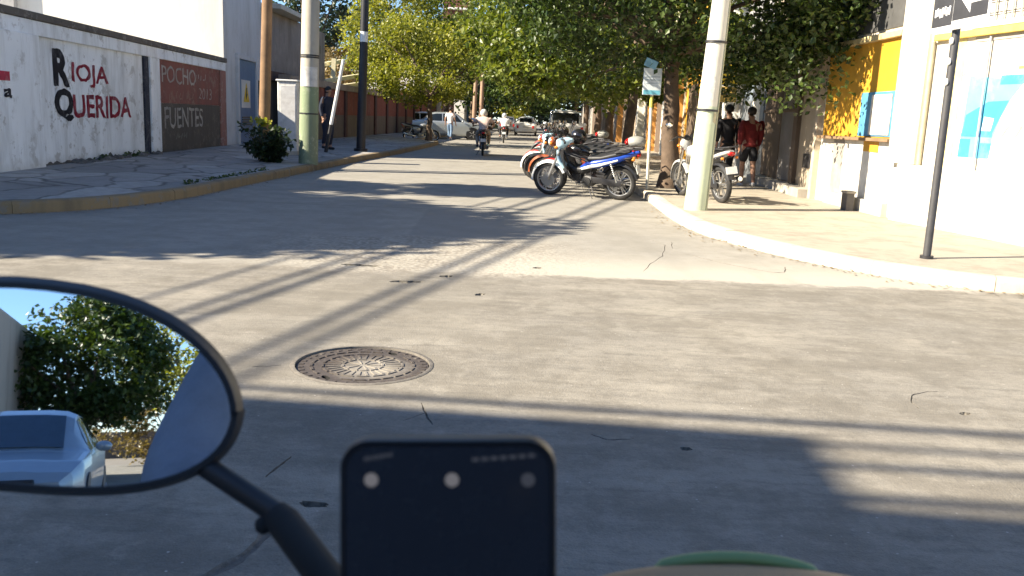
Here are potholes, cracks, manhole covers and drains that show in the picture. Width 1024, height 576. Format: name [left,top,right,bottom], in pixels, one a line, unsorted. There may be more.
crack [265,457,291,477]
manhole cover [290,346,434,385]
crack [645,241,786,273]
crack [405,403,433,425]
